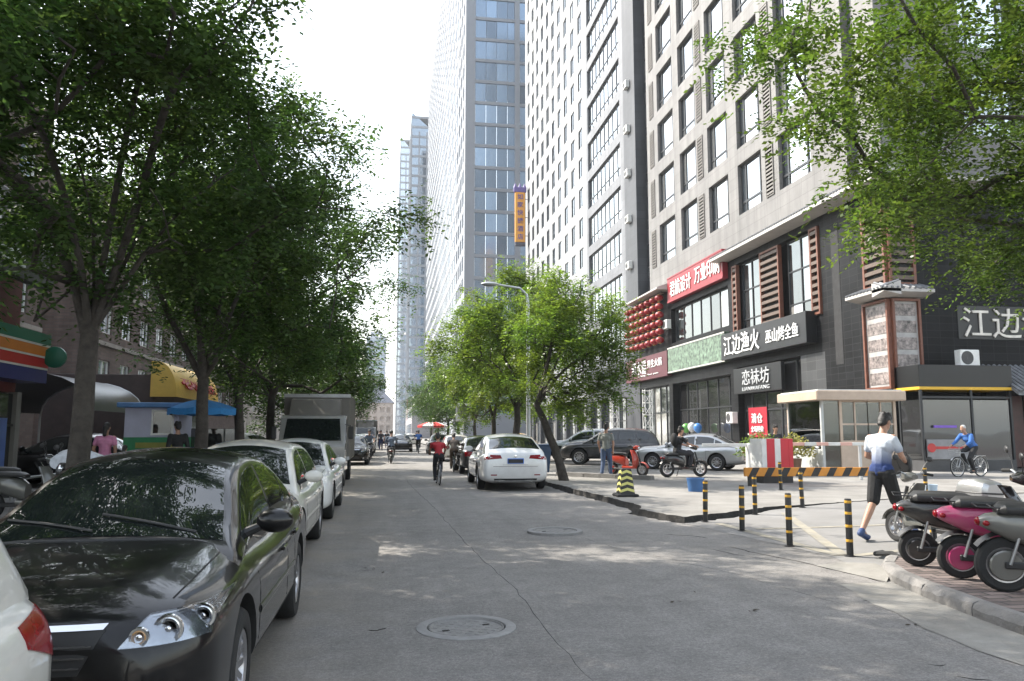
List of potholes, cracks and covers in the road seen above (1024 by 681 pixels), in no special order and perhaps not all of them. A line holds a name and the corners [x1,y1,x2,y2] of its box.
manhole cover [527,527,582,536]
manhole cover [416,615,516,640]
